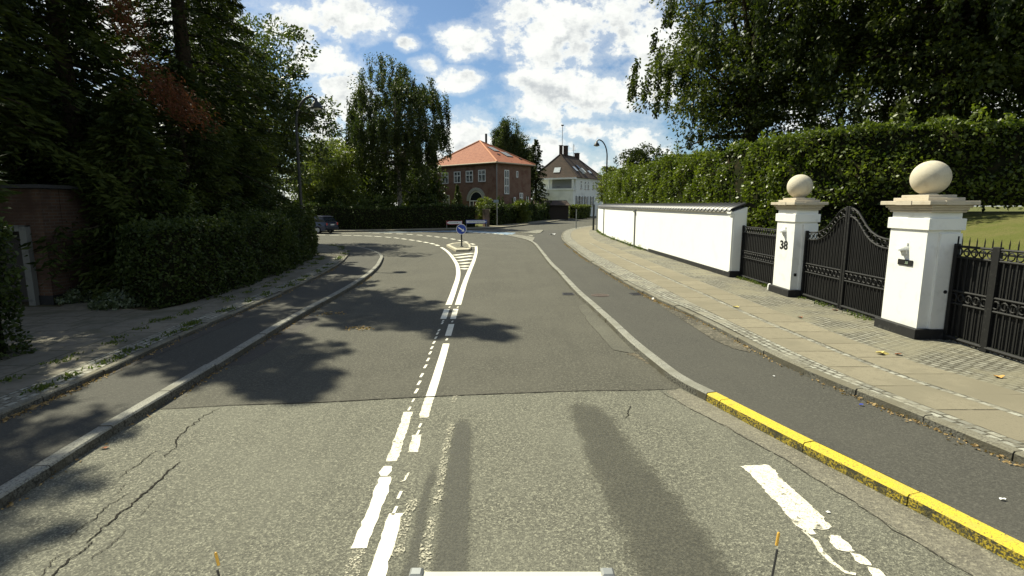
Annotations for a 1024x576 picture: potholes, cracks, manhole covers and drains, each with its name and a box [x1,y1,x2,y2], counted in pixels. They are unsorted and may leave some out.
crack [23,408,220,576]
